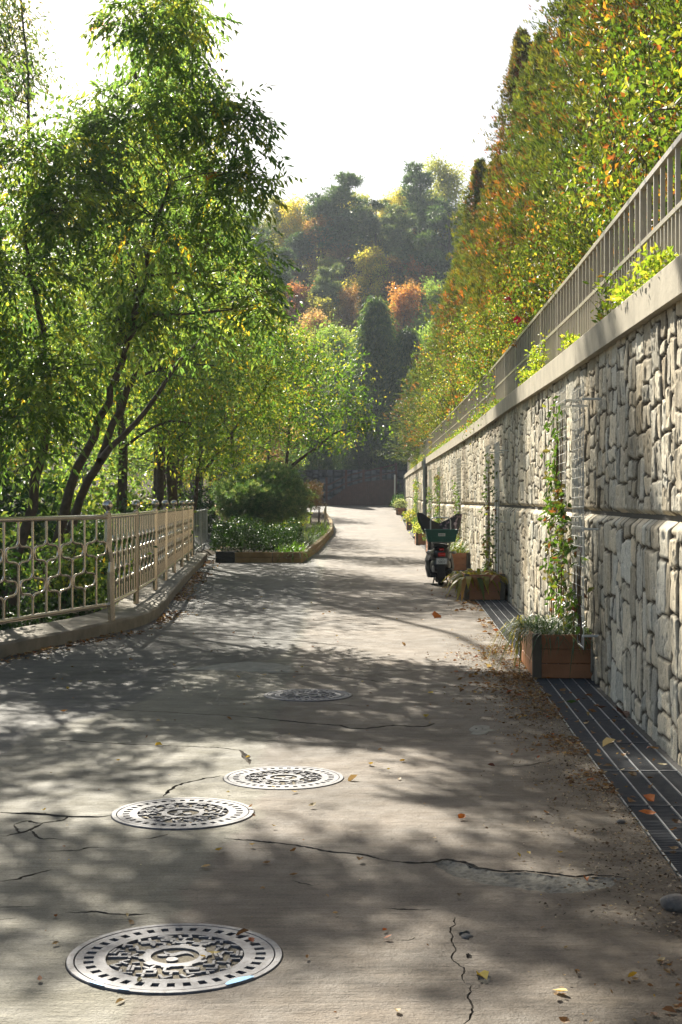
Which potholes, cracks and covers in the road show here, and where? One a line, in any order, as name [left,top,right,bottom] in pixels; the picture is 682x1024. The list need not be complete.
crack [224,838,625,910]
crack [163,776,219,796]
drain grate [626,805,682,853]
drain grate [538,684,606,700]
manhole cover [66,923,282,996]
manhole cover [111,797,254,830]
crack [0,812,110,852]
manhole cover [264,689,352,702]
drain grate [549,700,625,720]
manhole cover [223,766,344,790]
crack [5,870,49,881]
